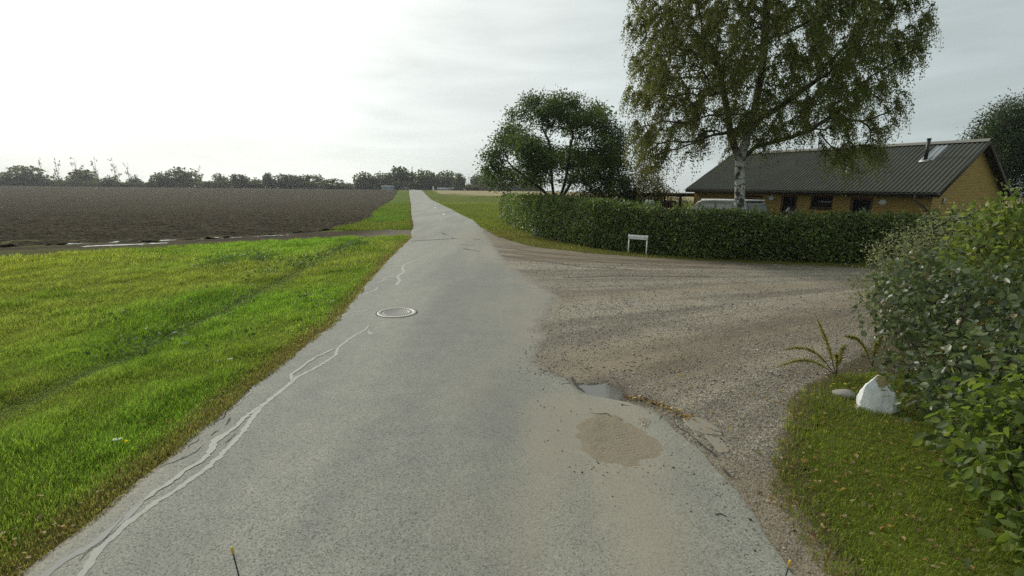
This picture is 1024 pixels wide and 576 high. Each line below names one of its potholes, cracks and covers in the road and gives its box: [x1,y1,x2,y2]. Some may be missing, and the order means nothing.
crack [163,412,236,466]
pothole [576,382,627,401]
manhole cover [375,308,418,318]
